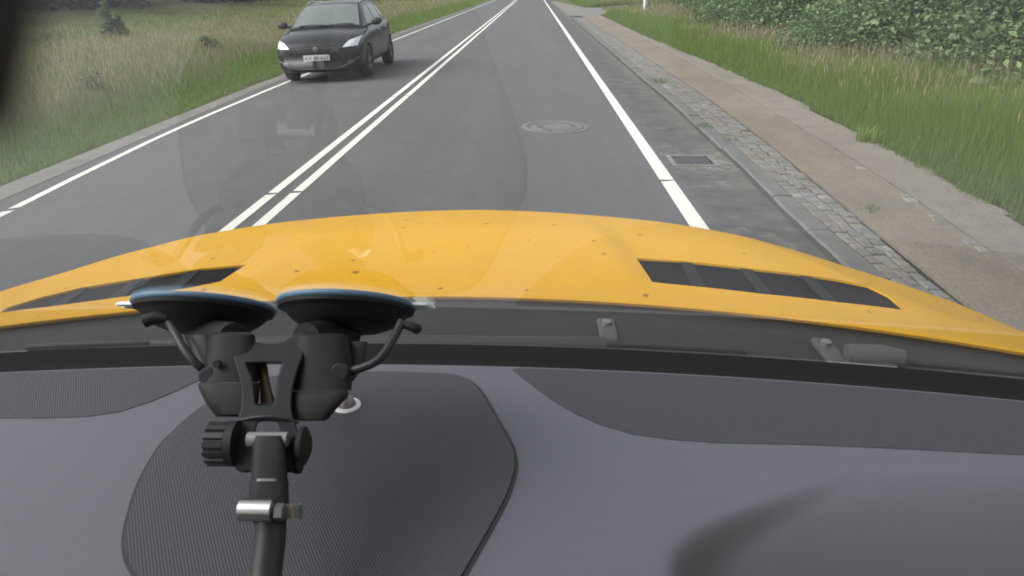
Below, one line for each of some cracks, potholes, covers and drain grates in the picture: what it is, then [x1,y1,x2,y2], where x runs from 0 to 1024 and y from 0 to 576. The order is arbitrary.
drain grate [665,154,720,166]
manhole cover [521,120,590,134]
